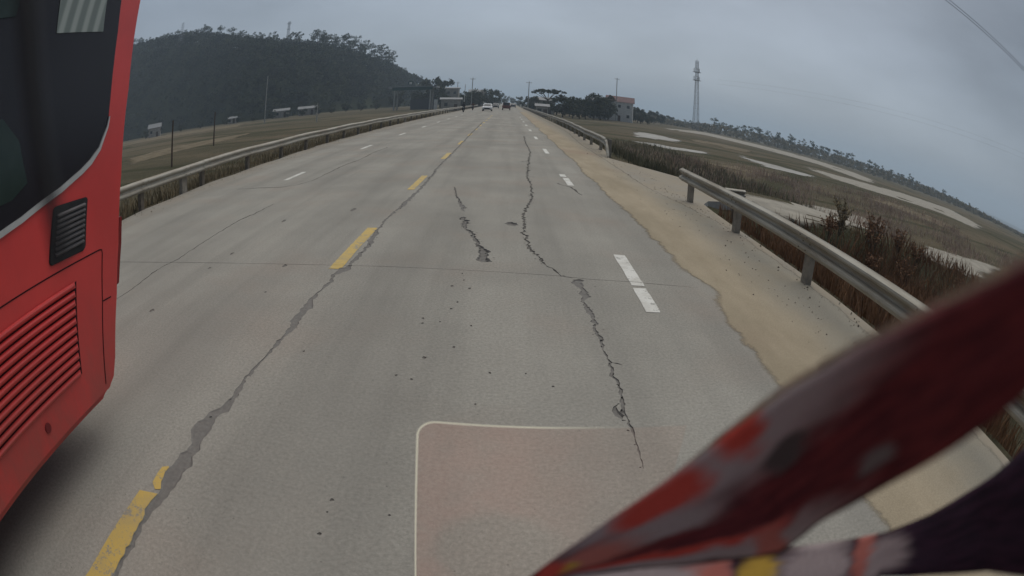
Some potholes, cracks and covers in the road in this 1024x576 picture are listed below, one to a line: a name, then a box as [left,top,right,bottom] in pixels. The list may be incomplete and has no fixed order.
crack [114,122,697,576]
